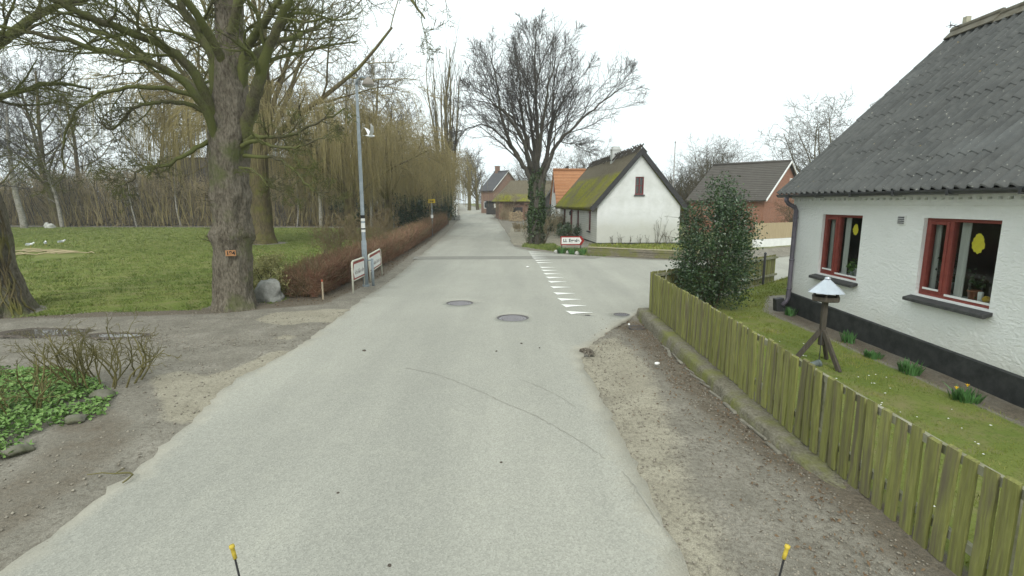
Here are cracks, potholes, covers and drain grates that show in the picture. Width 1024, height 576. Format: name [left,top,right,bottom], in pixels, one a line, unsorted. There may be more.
crack [410,368,606,459]
crack [623,472,661,527]
